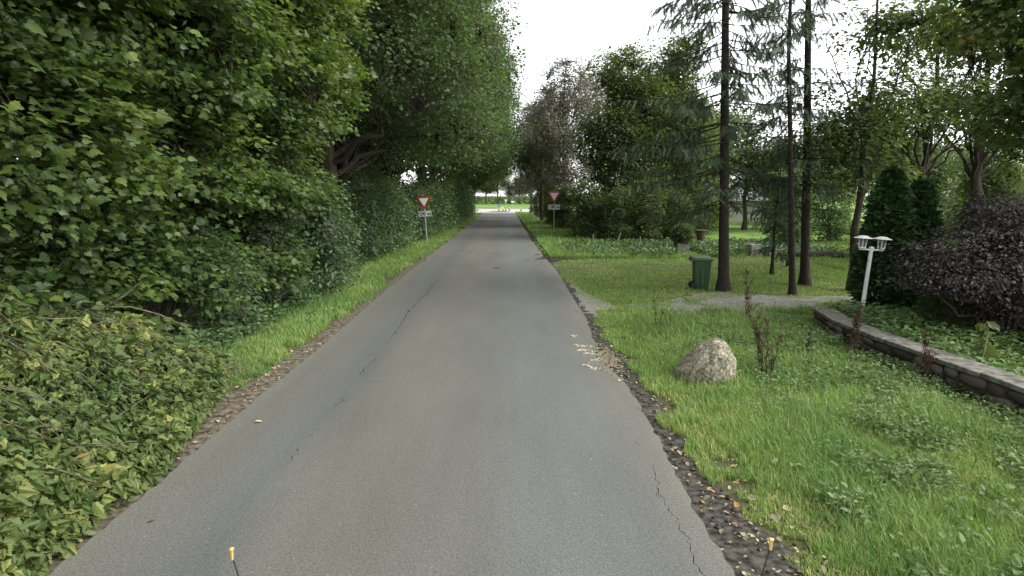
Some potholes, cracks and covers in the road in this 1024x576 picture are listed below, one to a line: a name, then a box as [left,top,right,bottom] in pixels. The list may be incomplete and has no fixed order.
crack [354,260,457,382]
crack [653,467,705,576]
